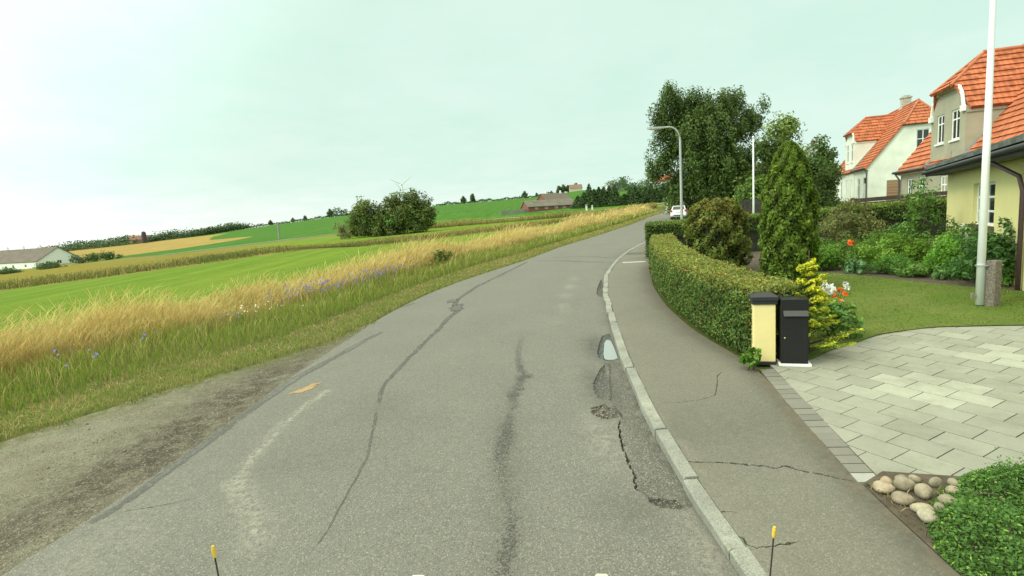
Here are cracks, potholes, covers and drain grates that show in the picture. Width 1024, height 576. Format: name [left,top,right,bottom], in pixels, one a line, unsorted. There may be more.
pothole [597,334,618,361]
pothole [591,404,619,419]
crack [688,461,853,482]
crack [739,537,796,549]
